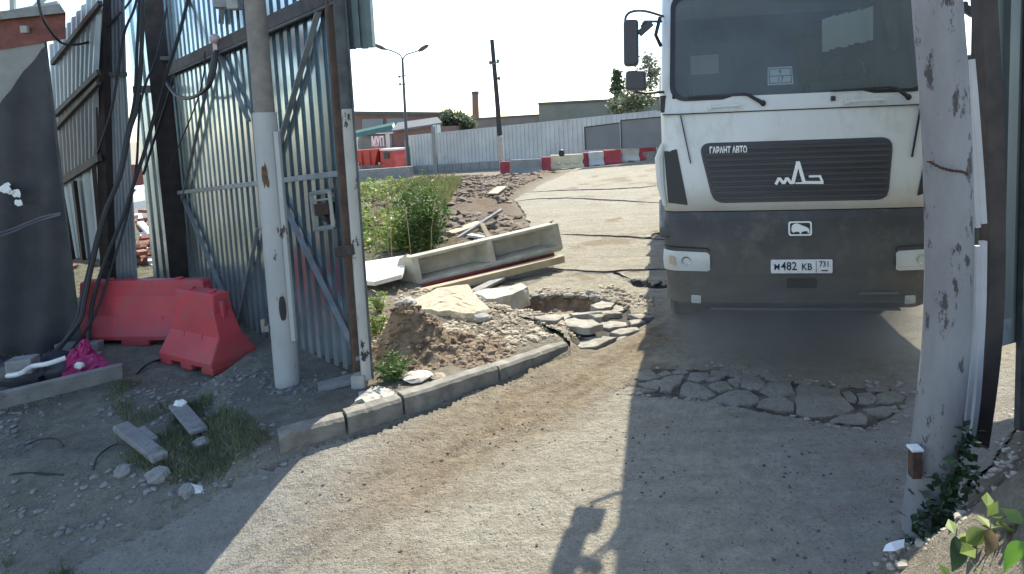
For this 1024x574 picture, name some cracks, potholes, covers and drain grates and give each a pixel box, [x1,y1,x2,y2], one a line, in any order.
crack [545,267,666,279]
crack [533,301,916,432]
pothole [623,278,667,289]
pothole [523,289,623,315]
crack [561,232,664,241]
